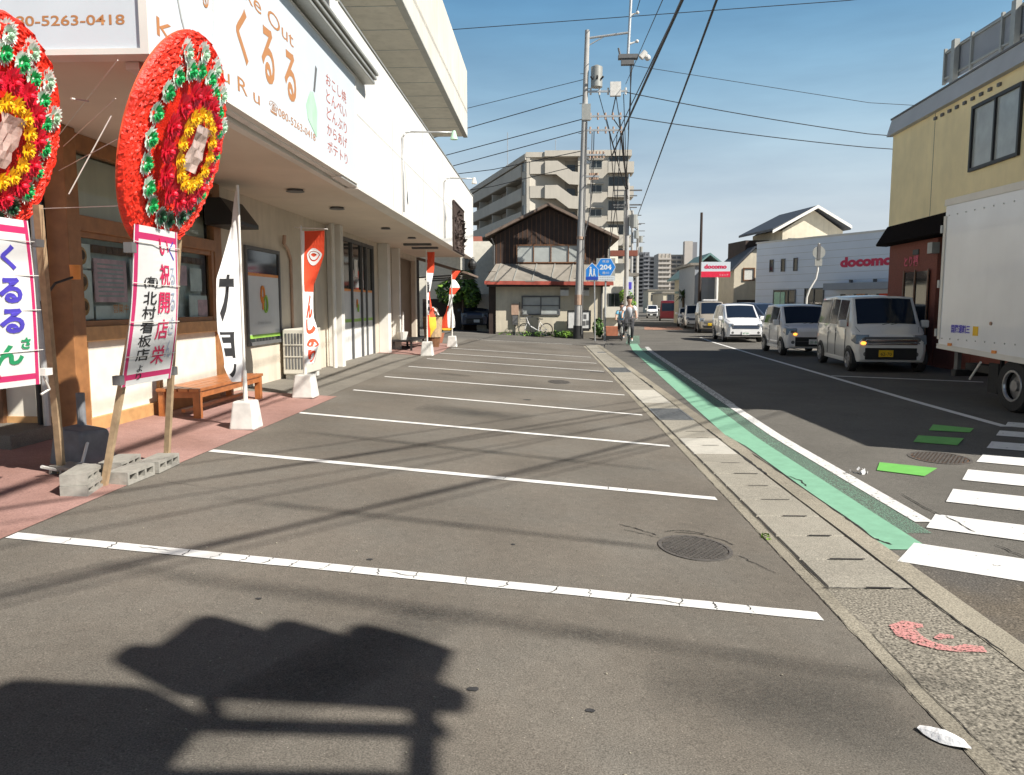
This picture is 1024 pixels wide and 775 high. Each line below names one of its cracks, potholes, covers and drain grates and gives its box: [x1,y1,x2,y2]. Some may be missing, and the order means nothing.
manhole cover [658,535,733,562]
manhole cover [907,451,973,465]
crack [620,524,776,573]
